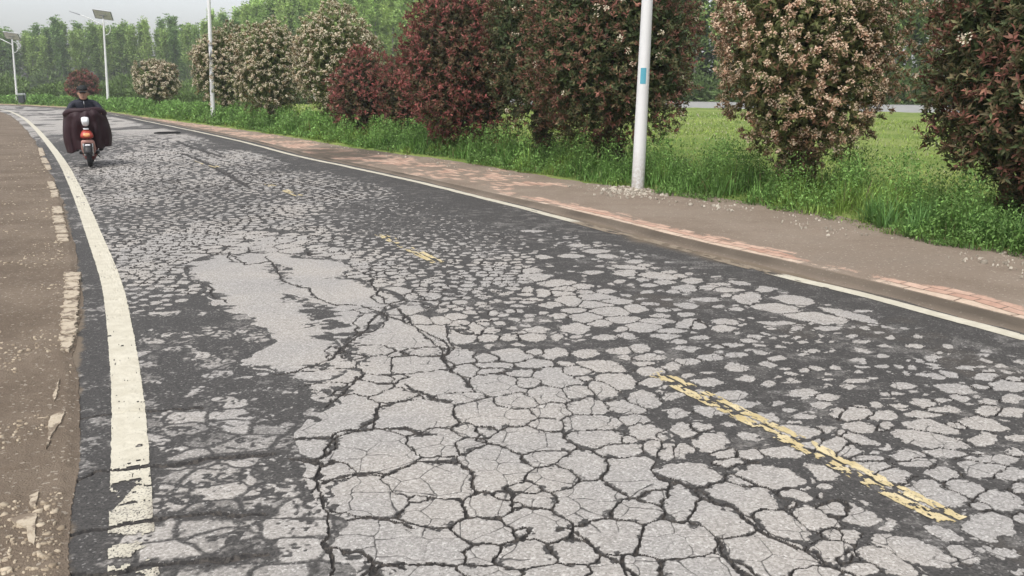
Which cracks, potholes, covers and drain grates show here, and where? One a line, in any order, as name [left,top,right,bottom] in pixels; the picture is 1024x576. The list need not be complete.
crack [67,140,1024,576]
